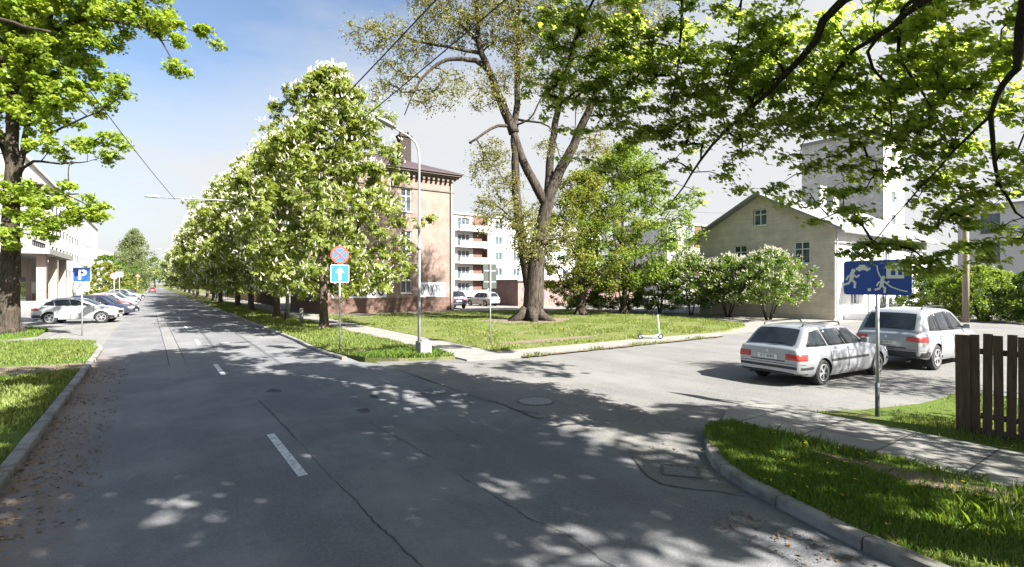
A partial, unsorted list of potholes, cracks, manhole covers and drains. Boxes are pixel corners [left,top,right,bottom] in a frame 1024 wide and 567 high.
manhole cover [662,463,702,479]
manhole cover [517,397,555,406]
